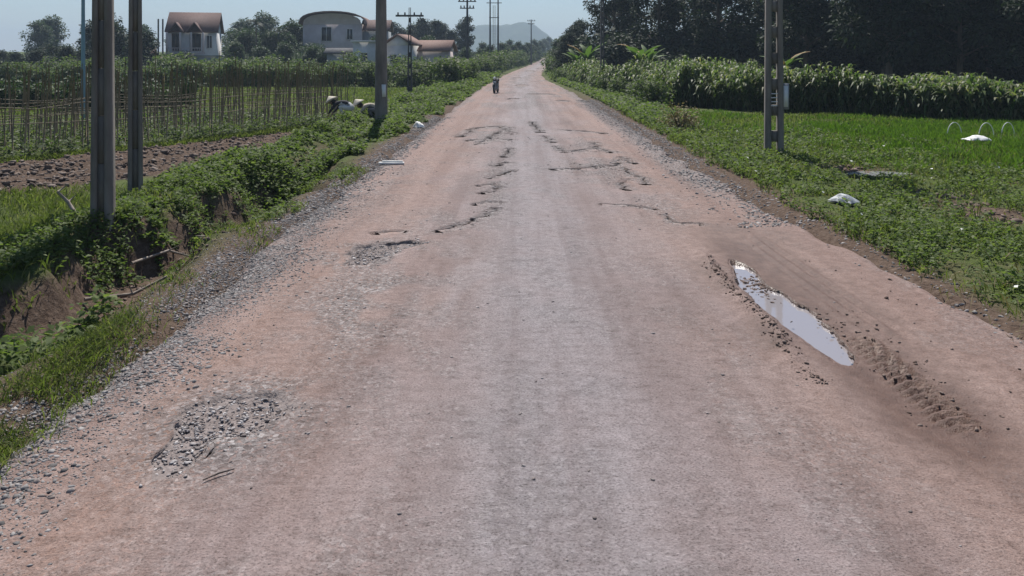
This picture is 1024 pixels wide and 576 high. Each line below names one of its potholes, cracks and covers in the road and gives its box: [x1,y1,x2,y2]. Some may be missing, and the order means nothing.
pothole [139,389,312,489]
pothole [729,259,859,368]
pothole [335,238,432,267]
crack [438,121,700,233]
